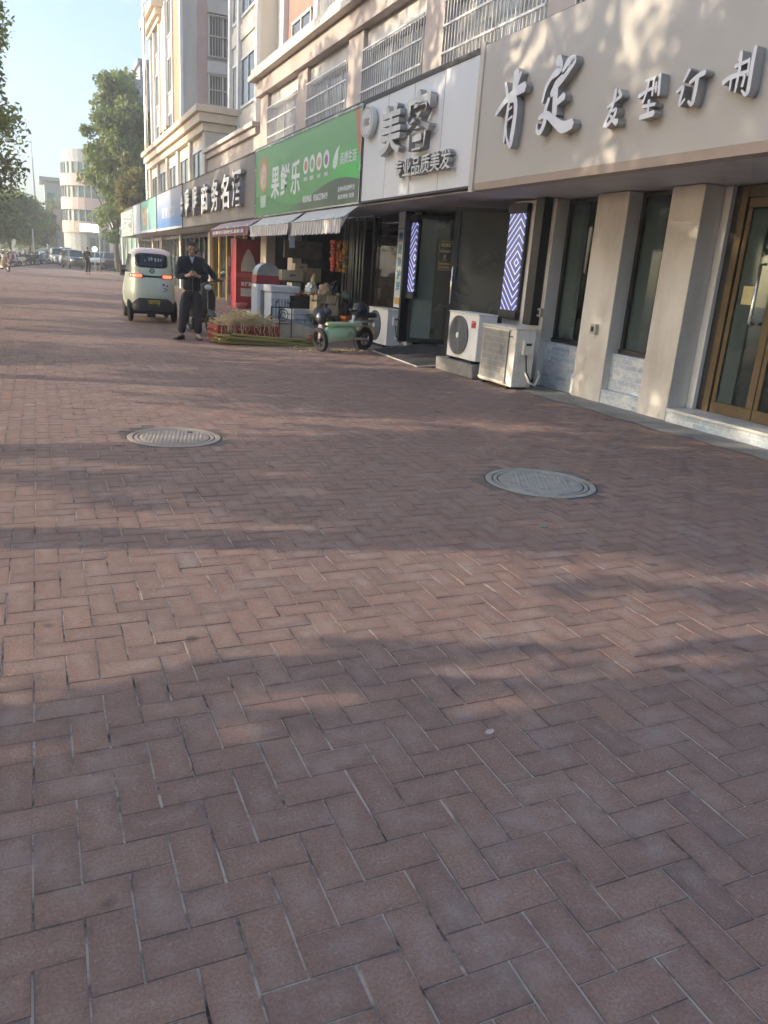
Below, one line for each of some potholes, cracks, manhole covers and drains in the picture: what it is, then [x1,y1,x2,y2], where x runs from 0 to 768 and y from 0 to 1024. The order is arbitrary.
manhole cover [118,425,232,451]
manhole cover [471,465,612,504]
